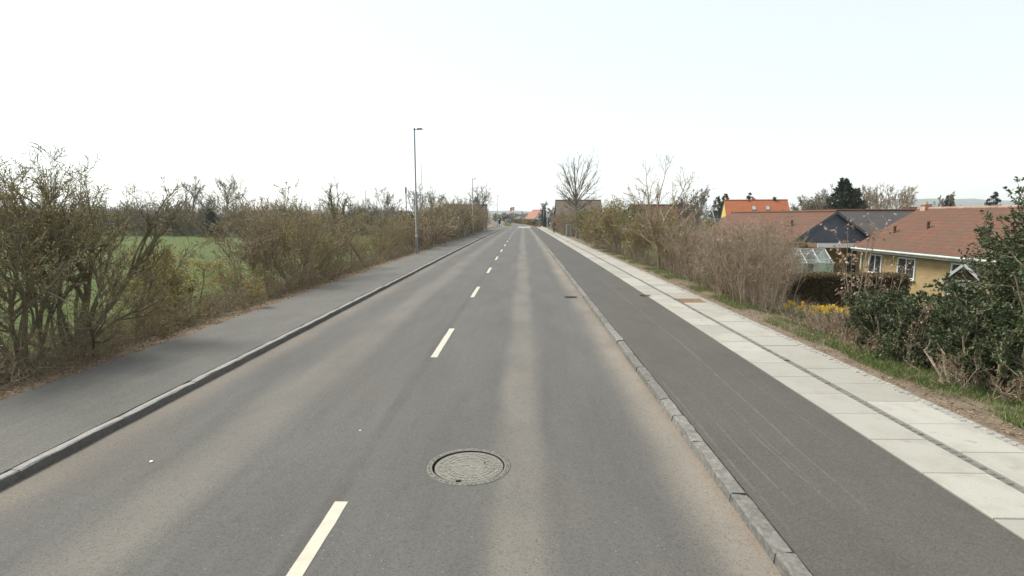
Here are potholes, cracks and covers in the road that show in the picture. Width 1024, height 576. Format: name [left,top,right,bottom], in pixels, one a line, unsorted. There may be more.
manhole cover [426,449,511,486]
